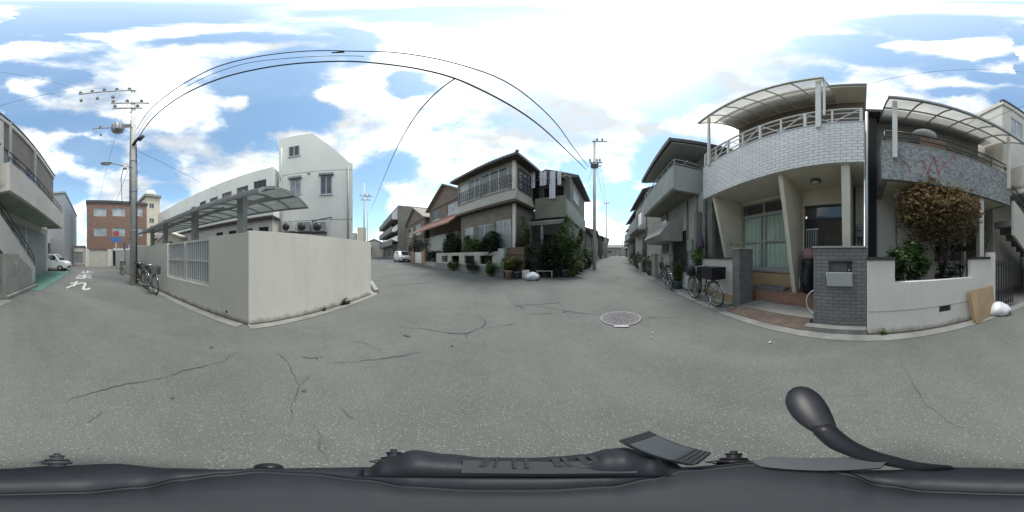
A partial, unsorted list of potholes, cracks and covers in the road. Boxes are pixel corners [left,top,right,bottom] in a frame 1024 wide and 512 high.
crack [71,354,232,422]
crack [276,341,425,424]
manhole cover [600,311,642,327]
crack [392,306,595,336]
